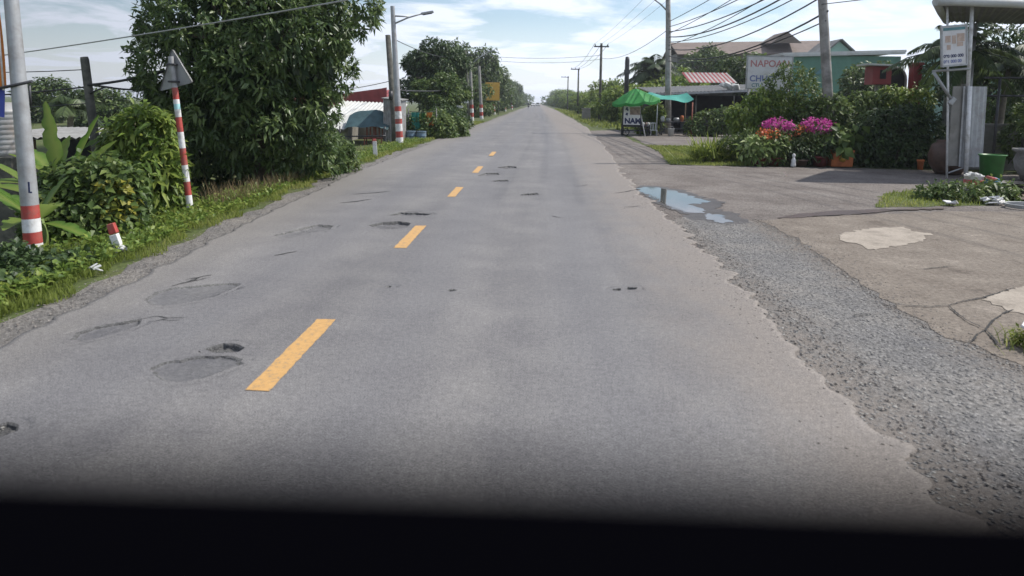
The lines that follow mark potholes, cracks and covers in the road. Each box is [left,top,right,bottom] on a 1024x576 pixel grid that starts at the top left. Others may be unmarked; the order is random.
pothole [196,341,253,356]
pothole [270,223,339,239]
crack [895,287,1014,348]
pothole [140,353,253,386]
pothole [61,316,150,344]
pothole [0,418,30,441]
pothole [362,220,416,231]
pothole [136,282,247,309]
